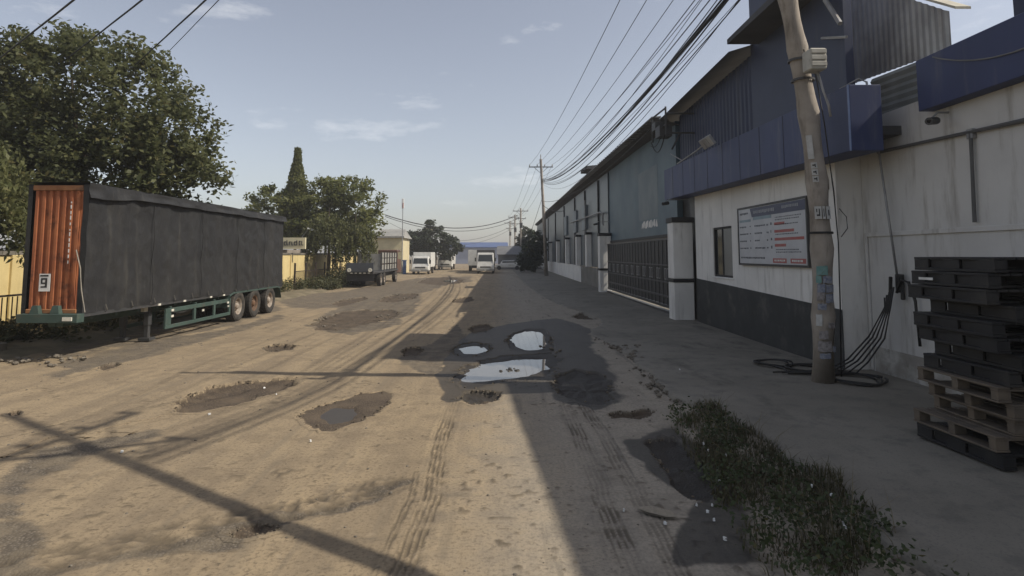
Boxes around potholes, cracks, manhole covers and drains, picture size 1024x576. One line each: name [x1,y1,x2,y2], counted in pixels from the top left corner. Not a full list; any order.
pothole [546,368,620,407]
pothole [465,323,495,334]
pothole [397,346,428,357]
pothole [215,517,291,544]
pothole [304,309,404,332]
pothole [94,362,125,372]
pothole [288,389,397,434]
pothole [165,375,303,415]
pothole [602,407,662,421]
pothole [450,389,506,406]
pothole [502,328,557,353]
pothole [445,341,497,359]
